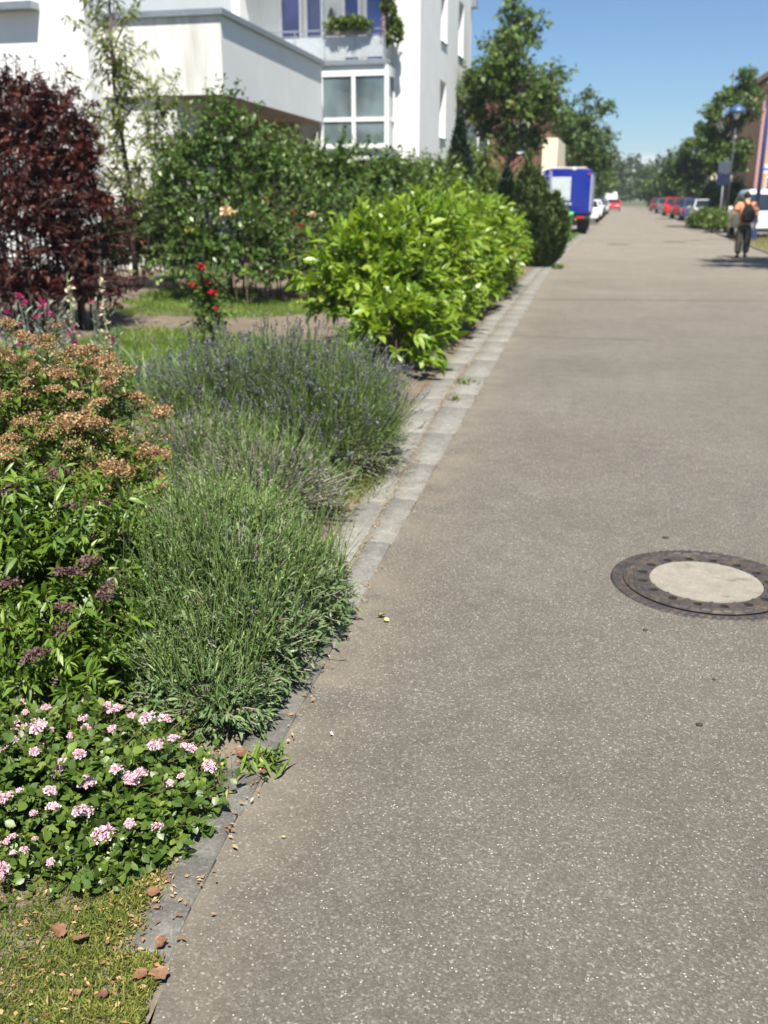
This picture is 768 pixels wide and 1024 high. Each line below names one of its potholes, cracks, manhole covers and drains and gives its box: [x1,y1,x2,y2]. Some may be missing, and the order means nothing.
manhole cover [611,550,768,622]
